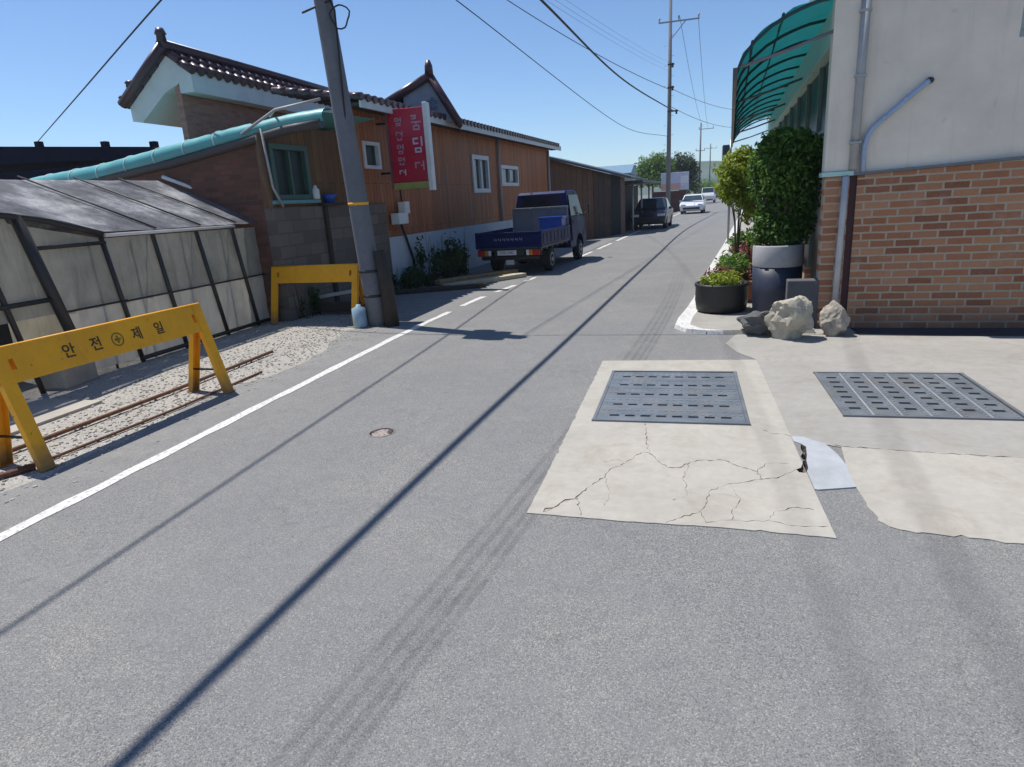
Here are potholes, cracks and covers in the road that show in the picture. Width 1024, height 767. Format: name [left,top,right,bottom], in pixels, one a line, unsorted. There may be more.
drain grate [813,372,1024,421]
crack [543,424,826,527]
drain grate [592,370,751,426]
manhole cover [367,427,396,438]
